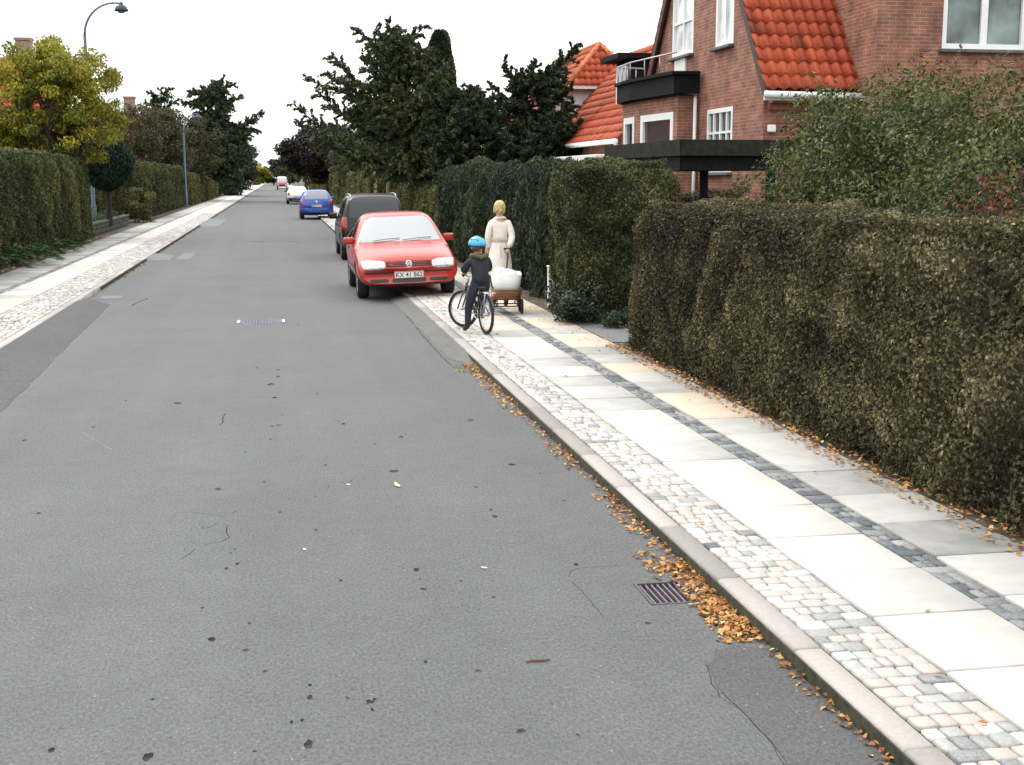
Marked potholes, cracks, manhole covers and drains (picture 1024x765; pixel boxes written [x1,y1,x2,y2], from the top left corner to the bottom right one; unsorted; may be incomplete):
drain grate [633,580,700,605]
crack [704,661,785,765]
crack [178,510,238,561]
